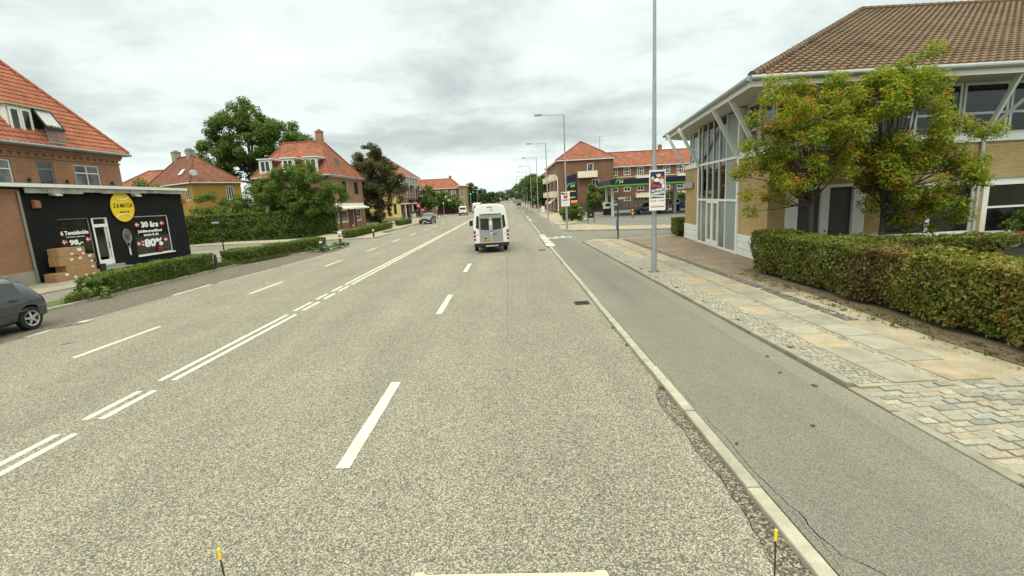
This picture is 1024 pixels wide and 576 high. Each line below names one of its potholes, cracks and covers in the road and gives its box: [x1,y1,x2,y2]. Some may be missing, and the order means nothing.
crack [706,418,886,576]
